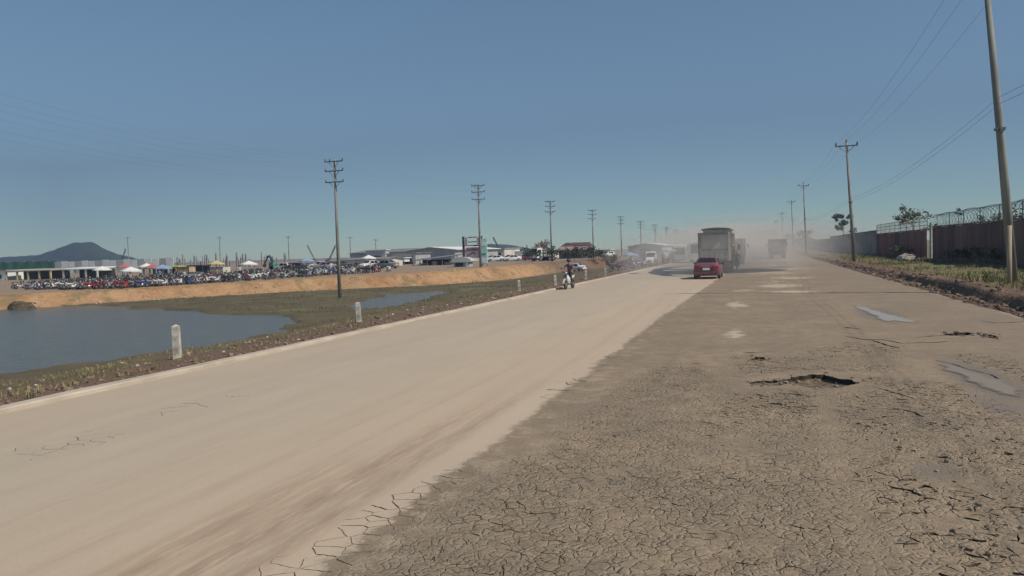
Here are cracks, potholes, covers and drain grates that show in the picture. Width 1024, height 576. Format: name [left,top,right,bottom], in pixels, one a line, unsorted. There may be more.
crack [384,363,867,576]
crack [735,327,1024,381]
pothole [744,378,793,386]
crack [259,470,462,576]
crack [851,438,1024,576]
crack [12,434,117,460]
crack [541,352,616,402]
crack [831,378,1022,465]
